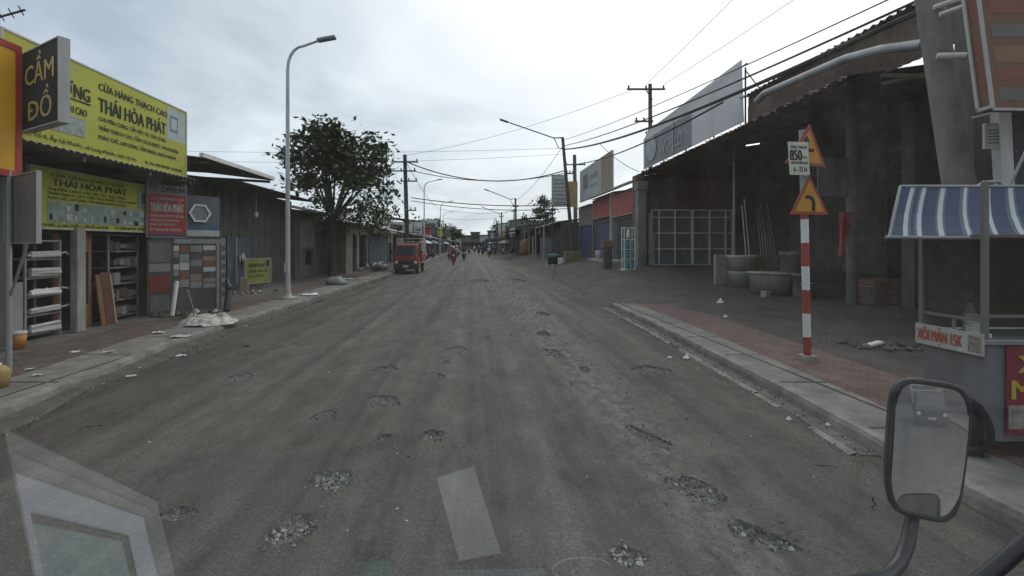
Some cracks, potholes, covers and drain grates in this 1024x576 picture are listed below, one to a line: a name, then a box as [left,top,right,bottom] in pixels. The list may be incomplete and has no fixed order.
pothole [603,539,649,574]
pothole [309,410,337,421]
pothole [372,365,399,373]
pothole [631,365,673,375]
pothole [616,419,673,451]
pothole [657,471,745,511]
pothole [304,468,356,494]
pothole [365,395,401,408]
pothole [727,516,809,560]
pothole [540,347,569,359]
pothole [158,506,199,524]
pothole [439,345,469,357]
